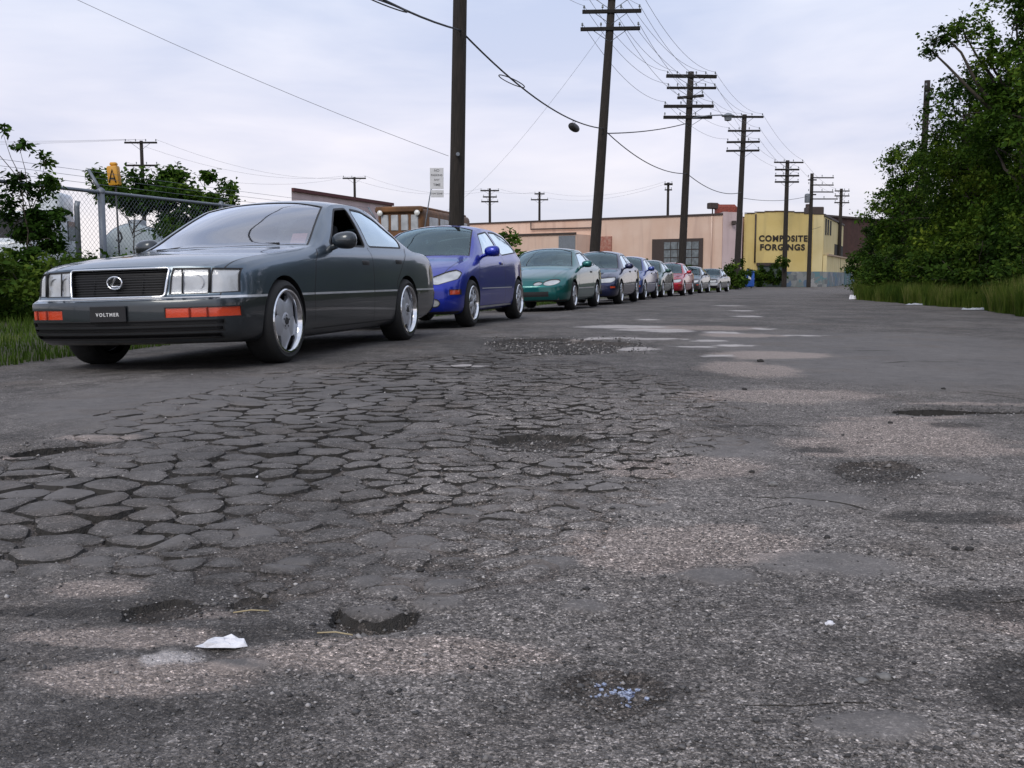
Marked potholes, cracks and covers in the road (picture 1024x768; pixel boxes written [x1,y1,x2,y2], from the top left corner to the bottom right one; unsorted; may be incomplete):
pothole [119,599,202,625]
pothole [490,434,592,453]
crack [742,496,877,512]
crack [0,349,828,602]
pothole [328,609,420,636]
pothole [833,461,926,485]
pothole [486,339,642,355]
